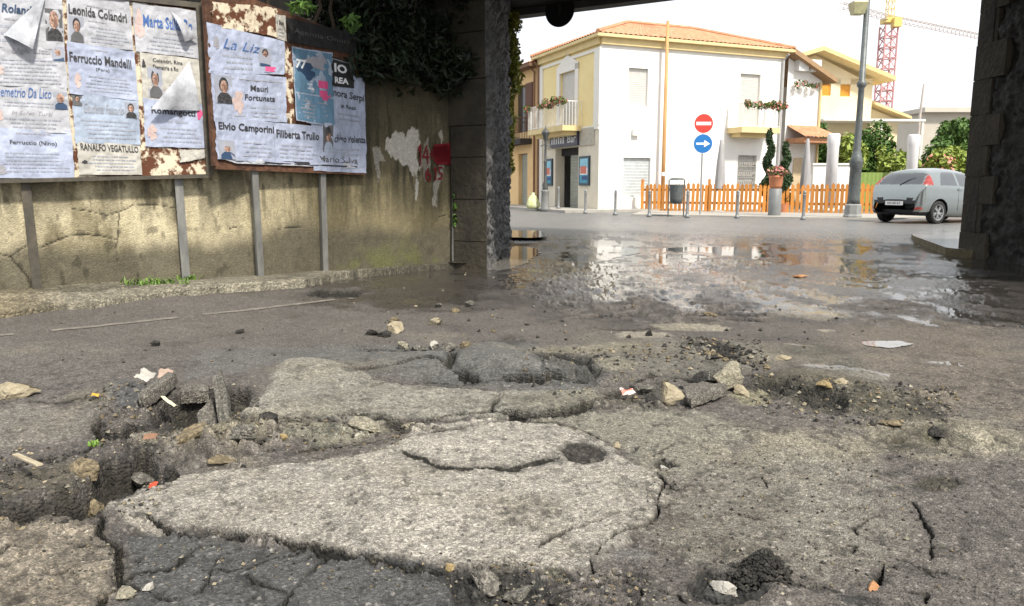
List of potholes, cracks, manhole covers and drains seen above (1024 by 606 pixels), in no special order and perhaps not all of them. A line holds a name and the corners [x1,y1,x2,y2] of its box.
pothole [147,387,257,430]
pothole [559,441,608,465]
crack [94,512,444,606]
pothole [741,376,857,414]
crack [847,502,946,604]
pothole [0,446,166,527]
crack [538,445,692,606]
pothole [686,565,771,606]
